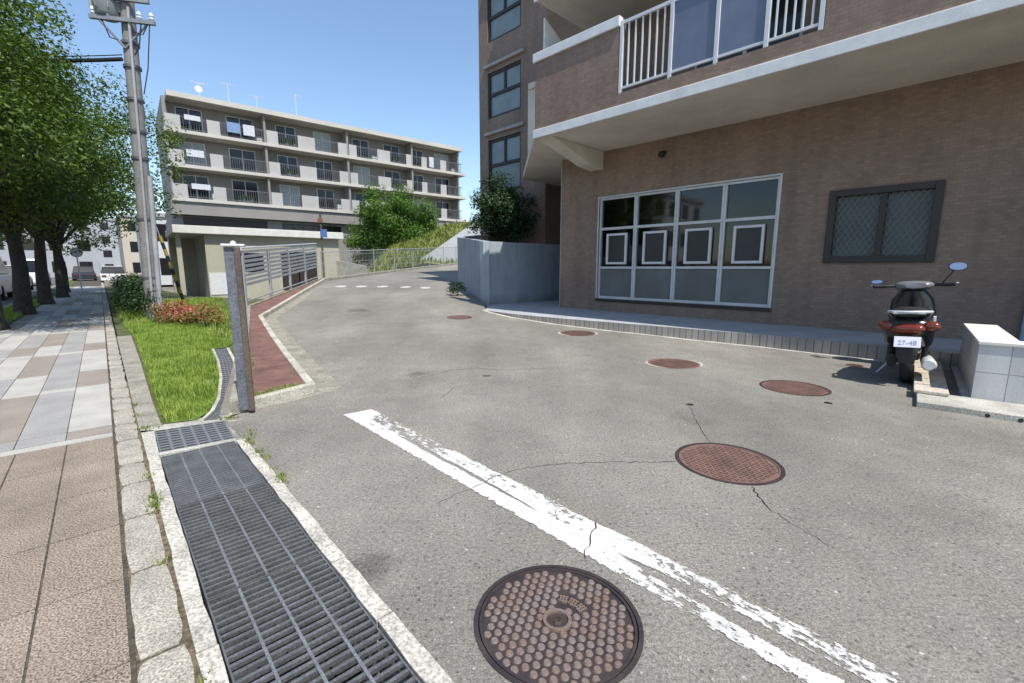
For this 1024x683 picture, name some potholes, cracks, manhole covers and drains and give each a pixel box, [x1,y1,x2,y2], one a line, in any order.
crack [751,486,847,551]
manhole cover [645,358,703,369]
manhole cover [474,565,644,683]
crack [436,461,676,504]
manhole cover [759,380,832,396]
drain grate [207,554,421,683]
drain grate [161,441,266,515]
manhole cover [675,443,786,486]
drain grate [177,483,321,607]
